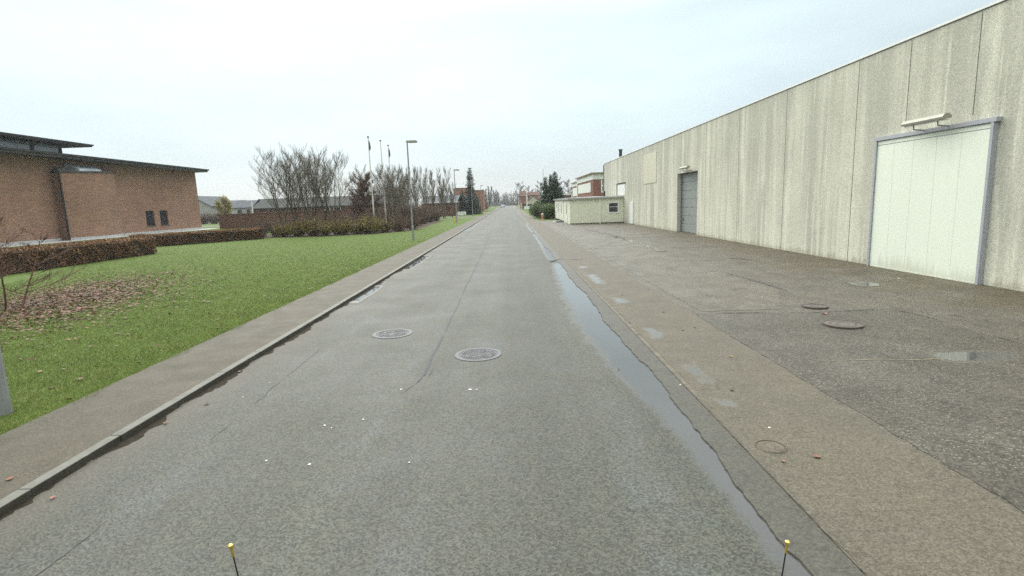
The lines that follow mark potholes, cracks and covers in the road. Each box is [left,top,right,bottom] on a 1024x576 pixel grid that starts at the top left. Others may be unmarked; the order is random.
utility cover [754,440,788,454]
crack [35,525,101,576]
manhole cover [821,319,865,329]
manhole cover [455,348,502,362]
manhole cover [372,329,413,339]
